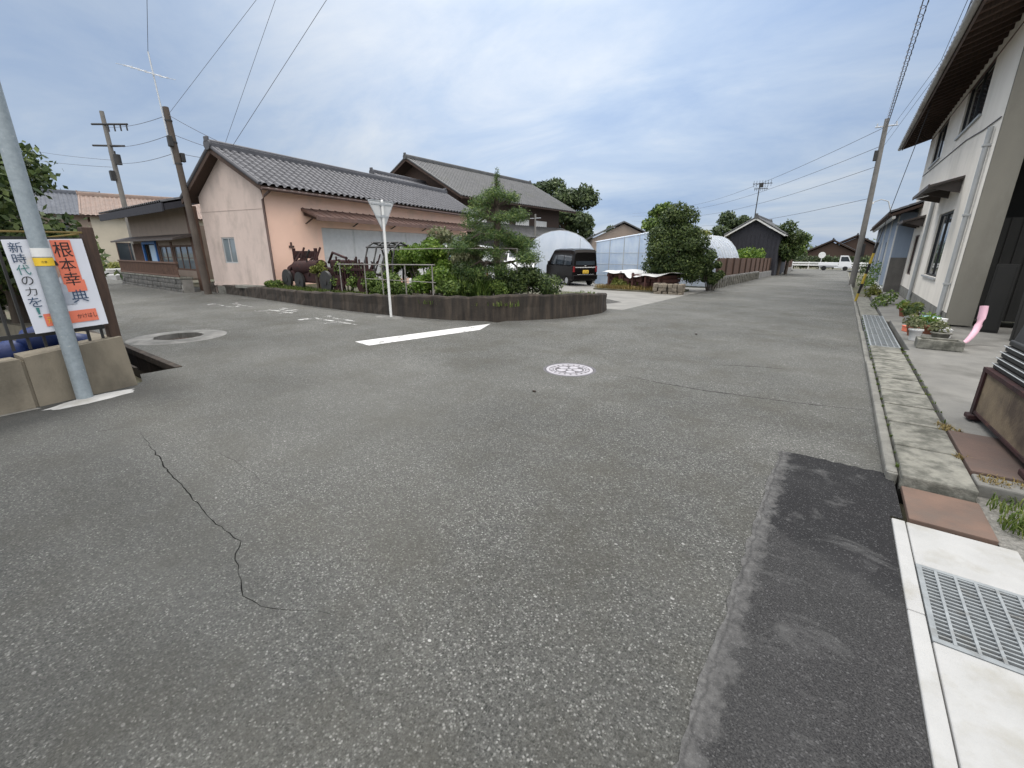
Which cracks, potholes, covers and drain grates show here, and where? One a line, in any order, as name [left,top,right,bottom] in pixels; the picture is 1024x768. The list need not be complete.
manhole cover [543,363,596,377]
manhole cover [125,330,227,345]
drain grate [915,563,1024,676]
crack [140,431,368,618]
drain grate [861,315,890,331]
